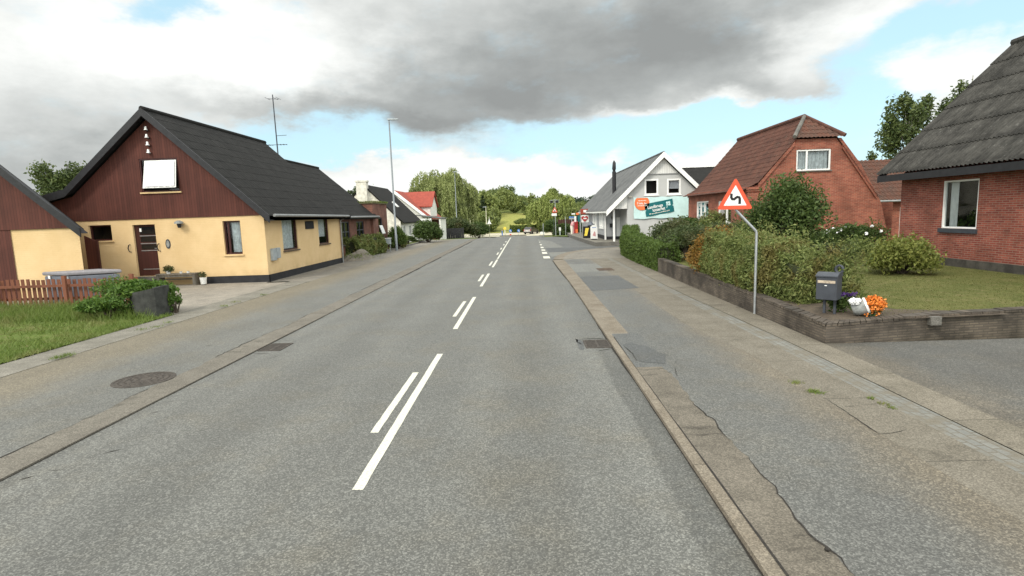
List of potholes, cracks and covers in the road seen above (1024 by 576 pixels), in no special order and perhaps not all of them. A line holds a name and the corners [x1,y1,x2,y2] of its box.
manhole cover [110,371,176,388]
drain grate [258,343,293,351]
crack [693,403,853,574]
drain grate [583,339,612,348]
